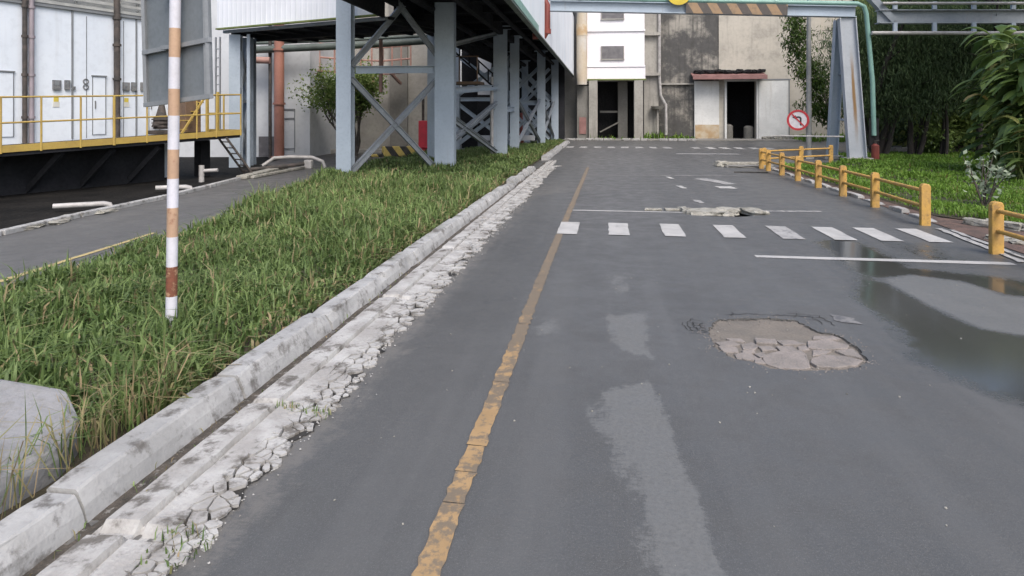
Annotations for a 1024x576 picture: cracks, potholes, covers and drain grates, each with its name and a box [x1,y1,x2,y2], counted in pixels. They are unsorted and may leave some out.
pothole [644,206,770,217]
pothole [692,312,879,379]
crack [163,167,556,576]
